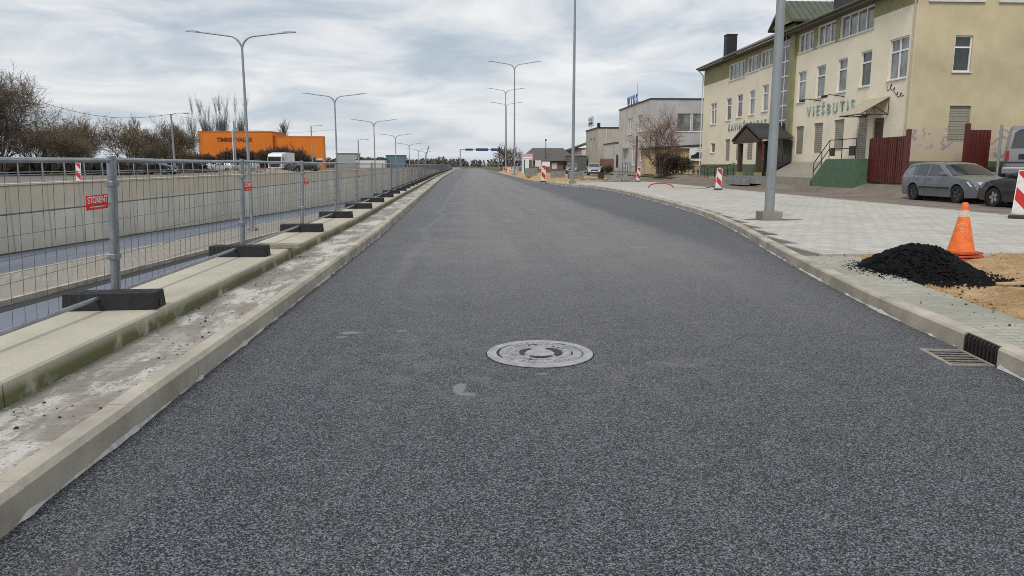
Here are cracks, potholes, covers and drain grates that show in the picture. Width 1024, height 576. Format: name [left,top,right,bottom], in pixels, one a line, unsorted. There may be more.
manhole cover [486,340,594,368]
drain grate [919,332,1018,367]
